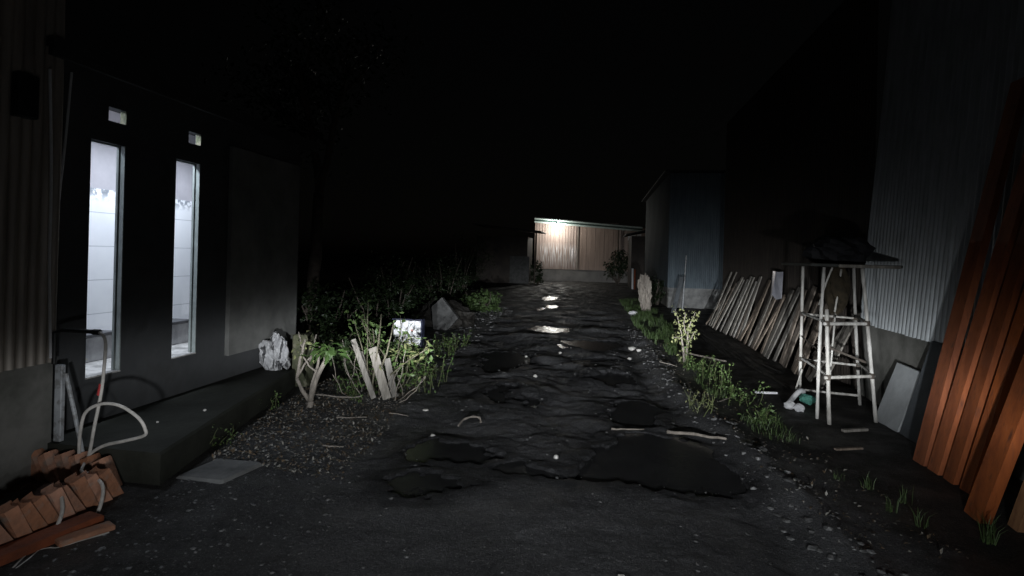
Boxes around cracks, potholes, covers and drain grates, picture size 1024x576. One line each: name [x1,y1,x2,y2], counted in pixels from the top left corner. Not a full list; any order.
pothole [480,382,523,404]
pothole [470,351,536,373]
pothole [567,430,750,499]
pothole [490,457,568,480]
pothole [603,399,668,427]
pothole [526,324,573,333]
pothole [401,436,508,465]
pothole [511,392,543,408]
pothole [382,468,477,500]
